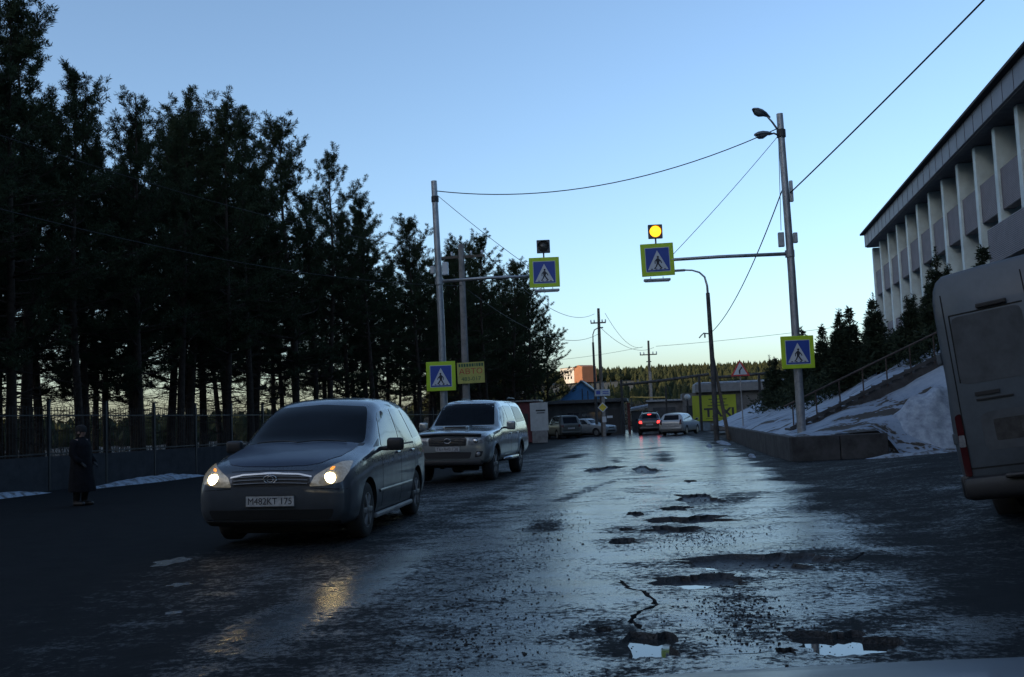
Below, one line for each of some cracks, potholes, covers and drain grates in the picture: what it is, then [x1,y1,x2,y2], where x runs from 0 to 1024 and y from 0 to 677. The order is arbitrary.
pothole [584,465,627,473]
pothole [621,631,680,659]
pothole [640,525,704,534]
pothole [641,515,741,524]
pothole [671,552,849,572]
pothole [675,493,730,506]
pothole [781,630,905,658]
crack [612,580,674,630]
pothole [646,572,748,590]
pothole [632,466,660,474]
